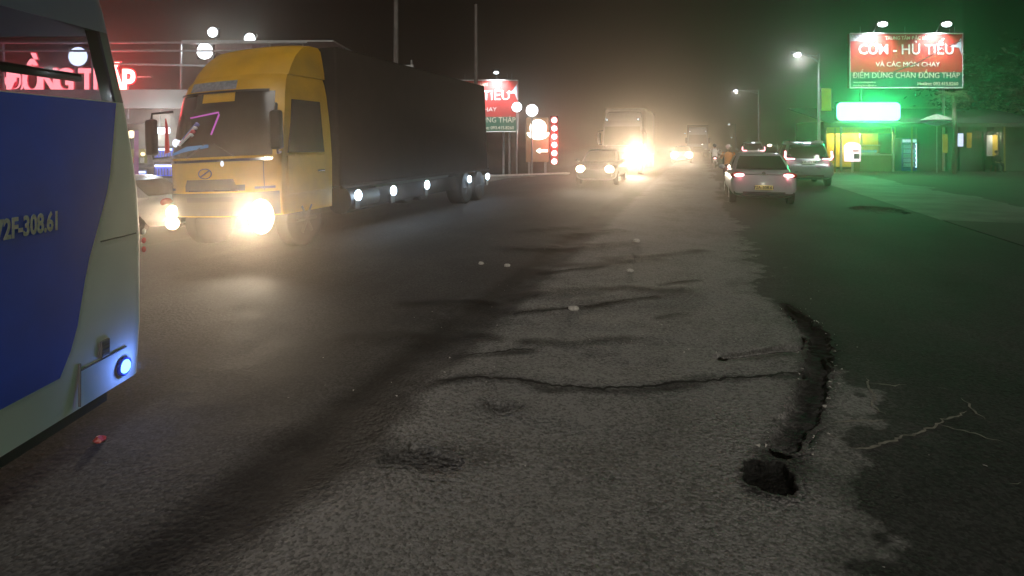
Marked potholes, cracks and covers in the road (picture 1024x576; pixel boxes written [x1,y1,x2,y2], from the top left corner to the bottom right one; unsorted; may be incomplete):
crack [431,371,803,390]
pothole [840,205,919,216]
crack [829,378,1021,484]
pothole [734,456,807,502]
pothole [484,400,521,416]
crack [460,348,533,358]
pothole [366,440,478,482]
crack [515,279,696,316]
